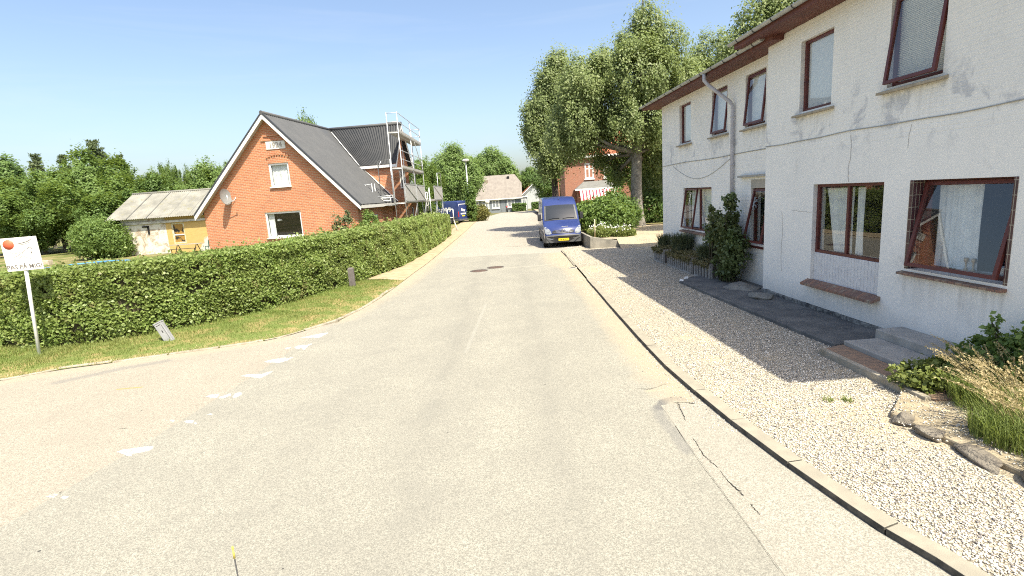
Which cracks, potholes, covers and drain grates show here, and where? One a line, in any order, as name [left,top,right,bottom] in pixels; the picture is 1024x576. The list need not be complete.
crack [646,384,761,516]
